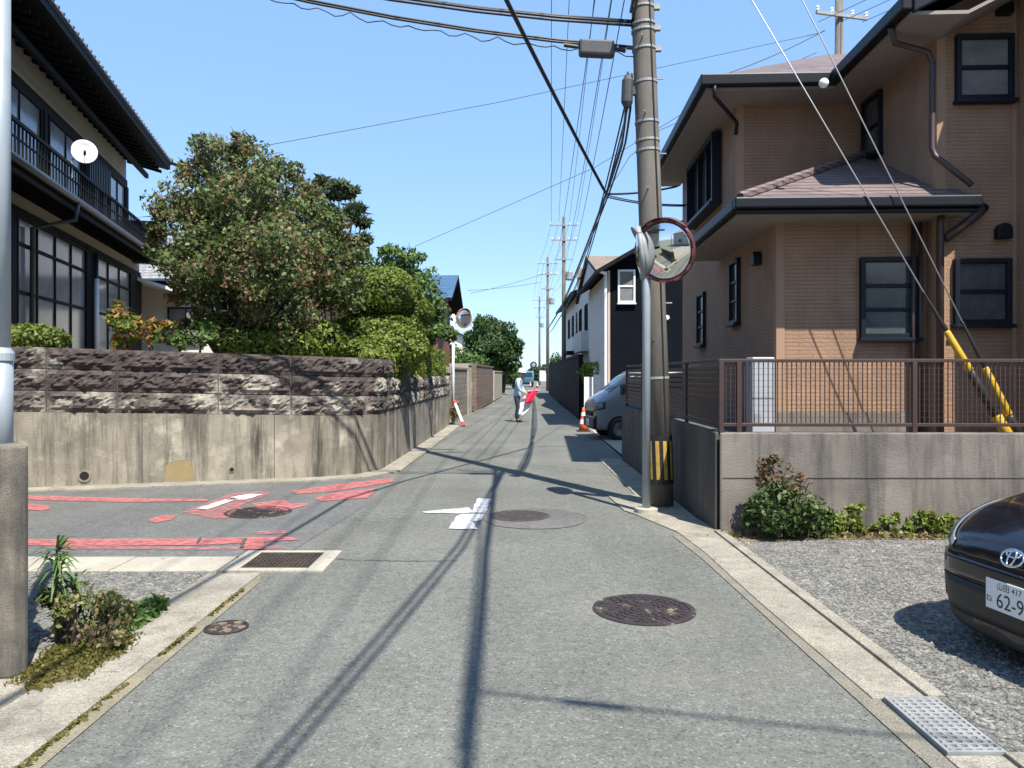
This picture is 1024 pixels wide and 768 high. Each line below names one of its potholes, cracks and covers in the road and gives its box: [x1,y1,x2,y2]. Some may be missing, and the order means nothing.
drain grate [220,550,342,574]
manhole cover [203,620,249,635]
manhole cover [593,594,696,626]
drain grate [884,696,1008,756]
manhole cover [223,506,292,519]
manhole cover [490,510,549,522]
